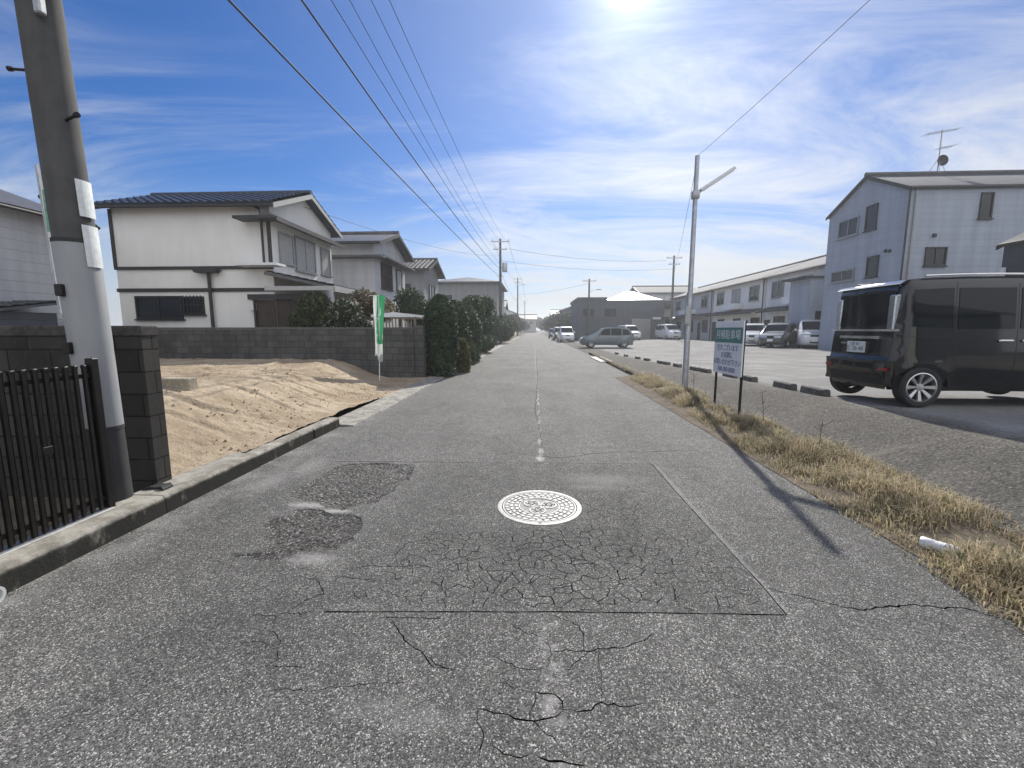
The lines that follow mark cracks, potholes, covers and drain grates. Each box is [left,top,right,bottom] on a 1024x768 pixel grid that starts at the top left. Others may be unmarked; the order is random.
crack [233,359,1023,766]
manhole cover [498,490,582,525]
